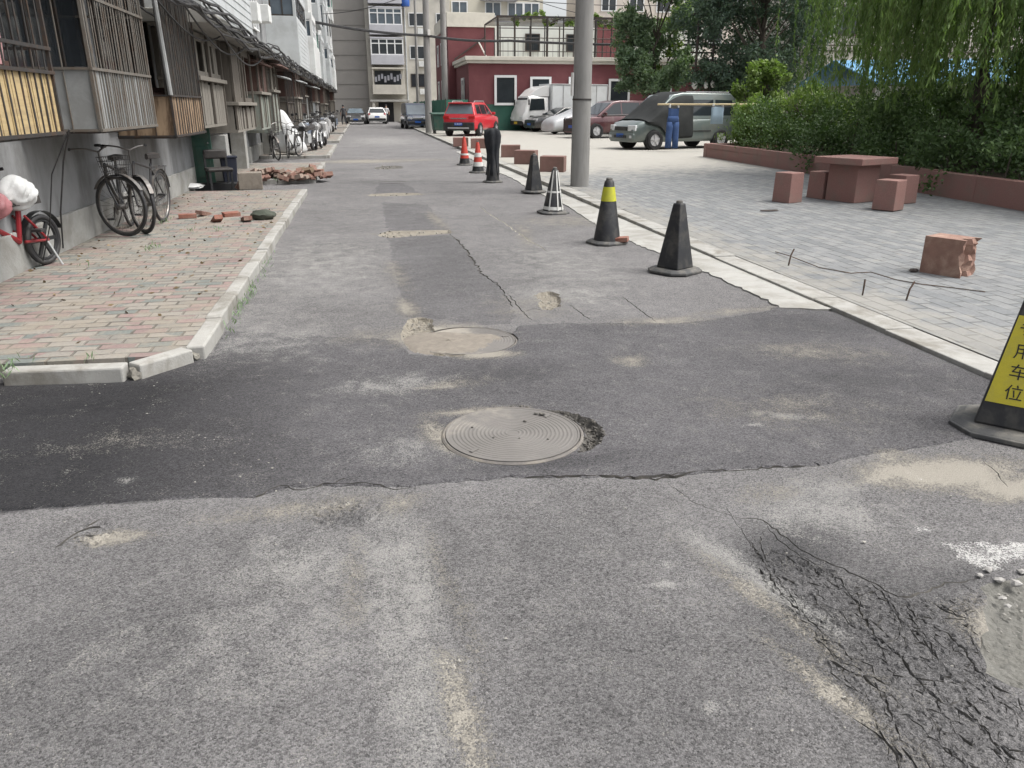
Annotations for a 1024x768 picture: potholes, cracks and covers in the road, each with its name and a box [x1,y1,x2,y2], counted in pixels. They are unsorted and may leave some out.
pothole [534,291,561,310]
manhole cover [433,327,518,355]
crack [668,483,1024,768]
crack [450,234,540,320]
crack [54,517,112,548]
manhole cover [441,407,584,466]
pothole [980,575,1024,690]
